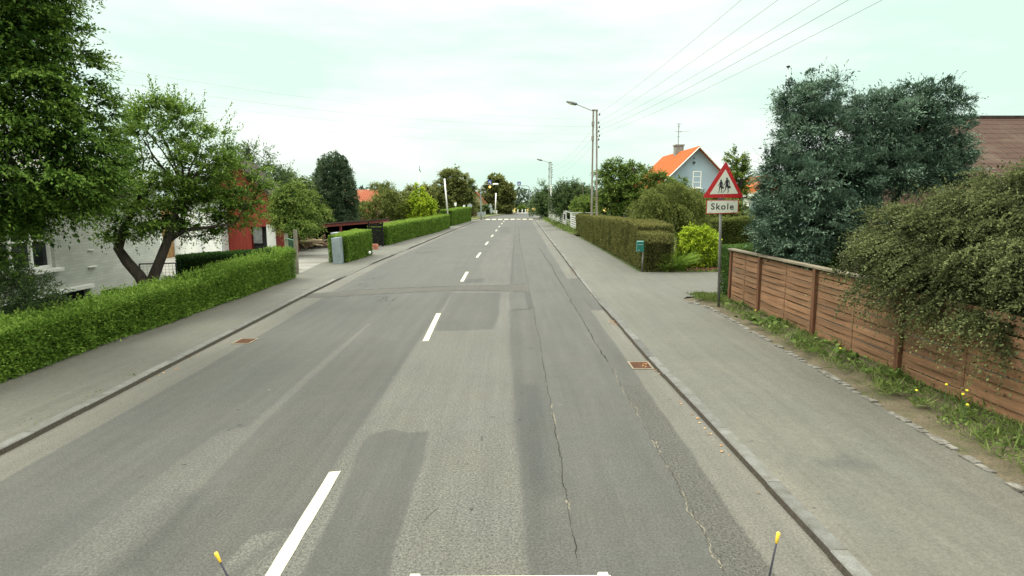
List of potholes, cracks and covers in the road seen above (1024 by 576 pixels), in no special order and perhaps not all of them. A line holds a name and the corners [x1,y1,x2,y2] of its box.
crack [517,247,579,570]
drain grate [627,361,654,369]
crack [609,365,723,568]
